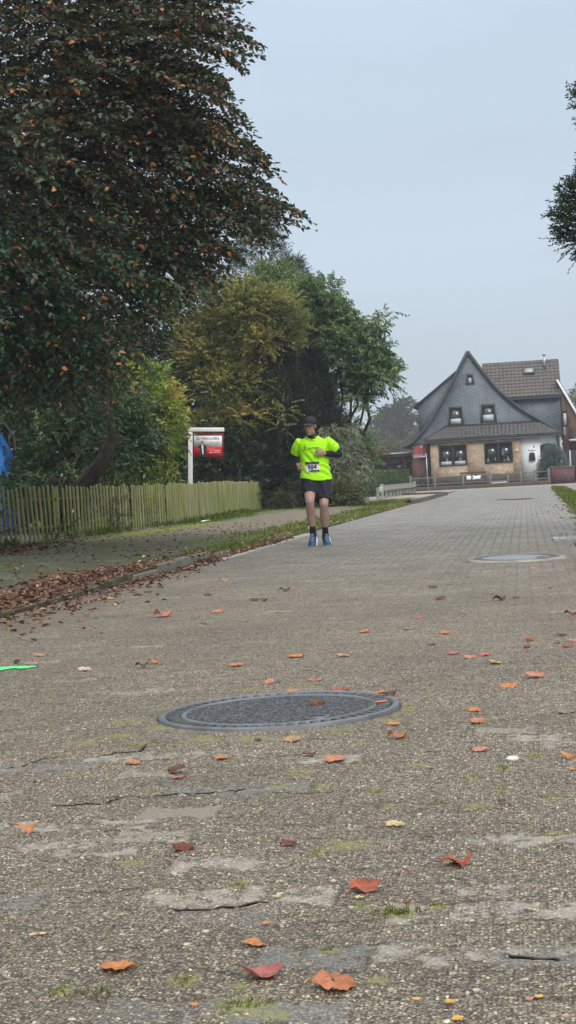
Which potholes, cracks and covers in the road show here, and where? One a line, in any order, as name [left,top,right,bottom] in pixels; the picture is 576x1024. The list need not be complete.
crack [168,901,269,912]
manhole cover [158,690,400,731]
manhole cover [466,553,566,564]
crack [51,798,118,807]
crack [97,743,147,757]
crack [154,788,246,797]
